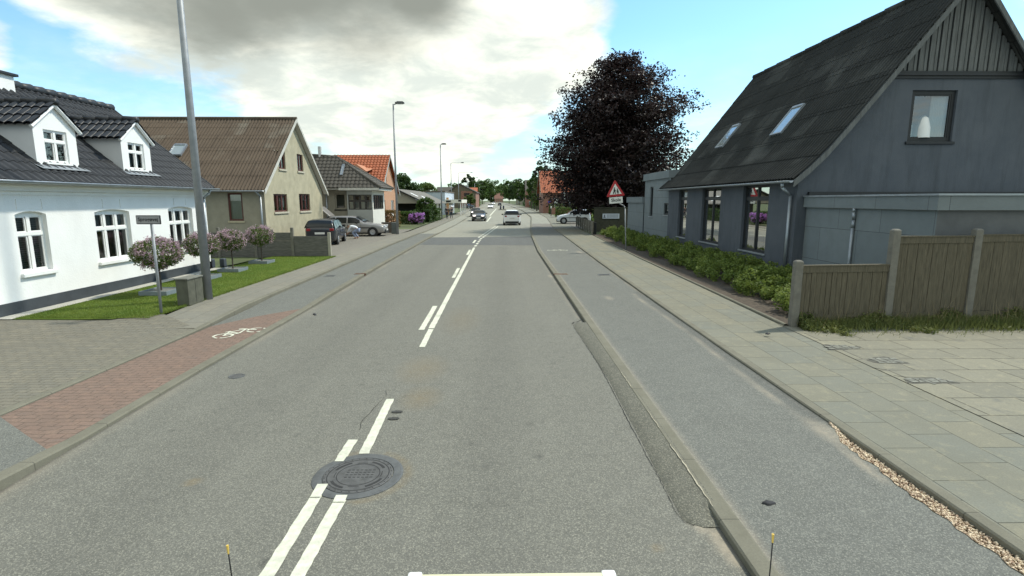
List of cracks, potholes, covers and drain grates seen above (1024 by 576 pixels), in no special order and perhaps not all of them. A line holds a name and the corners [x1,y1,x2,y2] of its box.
manhole cover [311,454,403,500]
